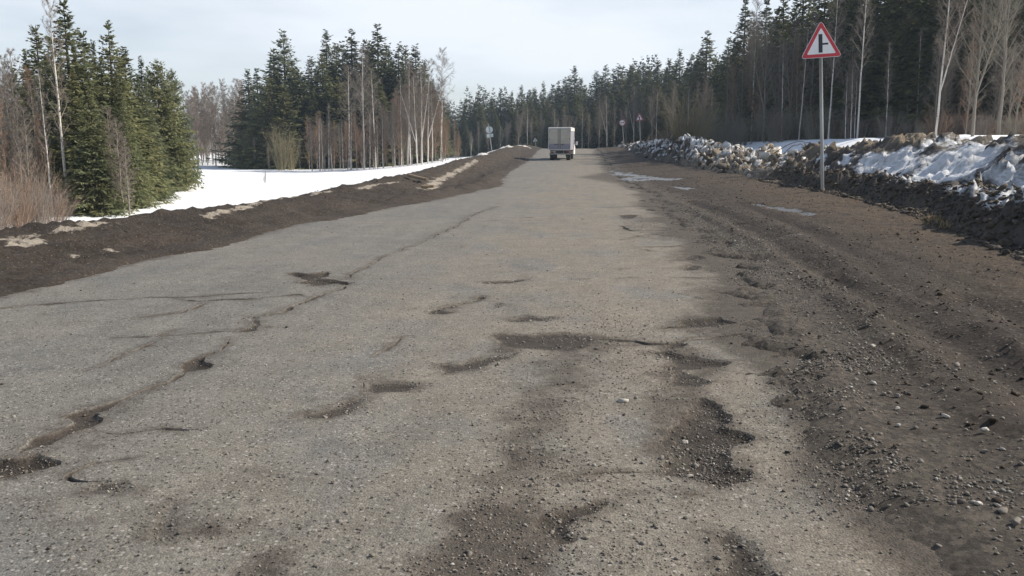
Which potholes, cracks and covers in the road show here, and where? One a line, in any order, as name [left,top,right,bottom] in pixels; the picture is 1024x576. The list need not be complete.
pothole [179,352,215,373]
crack [0,207,504,482]
pothole [0,453,62,478]
pothole [662,371,718,387]
pothole [83,479,139,494]
pothole [434,353,518,374]
pothole [658,397,756,488]
pothole [659,317,736,329]
pothole [644,342,732,371]
pothole [425,295,486,314]
pothole [293,396,370,419]
pothole [286,271,354,286]
